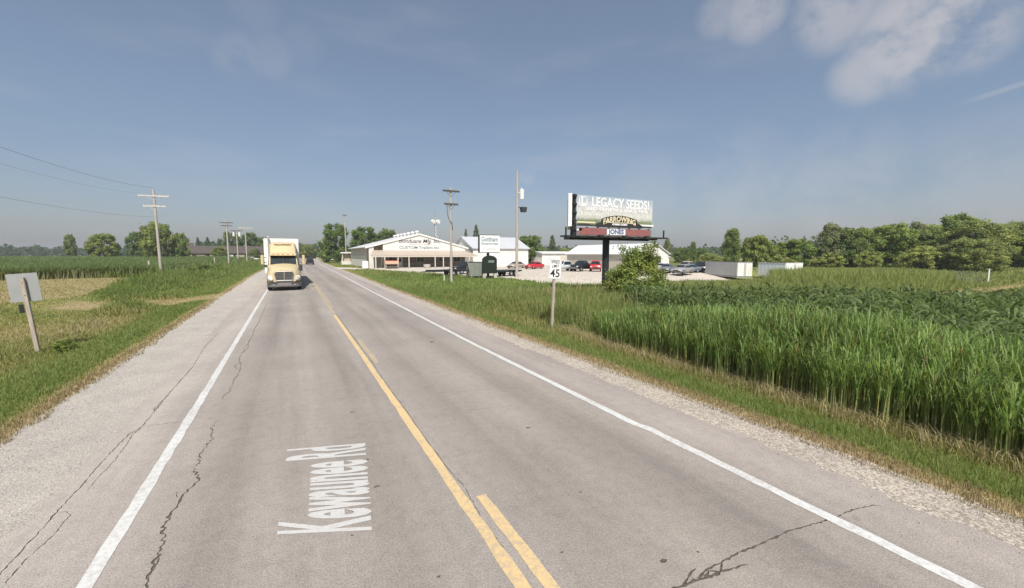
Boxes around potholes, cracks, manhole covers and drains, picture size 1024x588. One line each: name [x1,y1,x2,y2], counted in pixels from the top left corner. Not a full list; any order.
crack [145,304,302,588]
crack [672,505,878,588]
crack [0,334,217,585]
